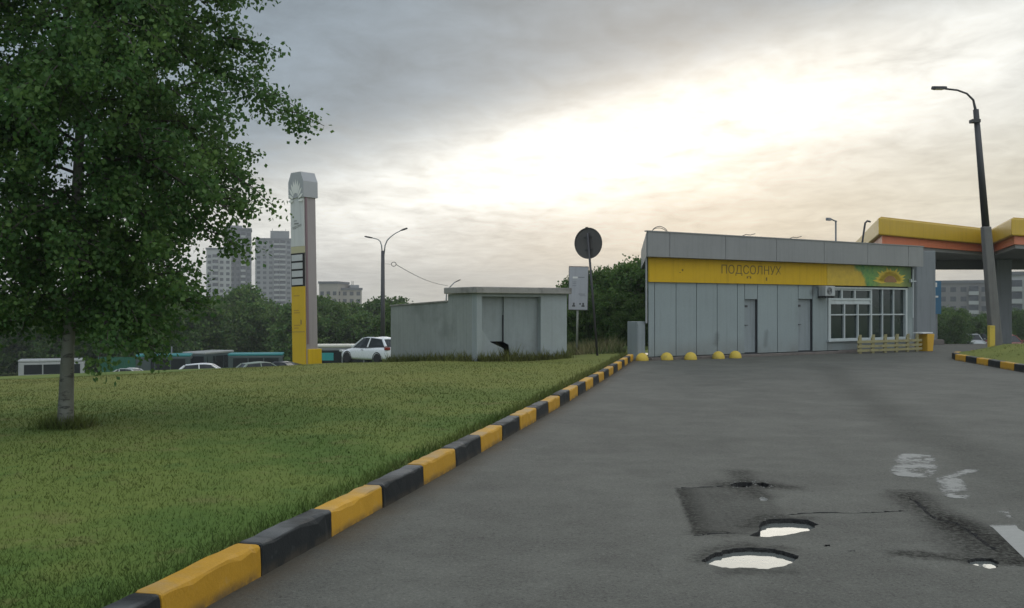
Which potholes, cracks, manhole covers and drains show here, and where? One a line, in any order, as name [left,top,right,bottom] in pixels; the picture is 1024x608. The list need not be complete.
pothole [701,547,799,569]
pothole [967,558,999,569]
pothole [750,516,832,537]
crack [789,498,998,552]
